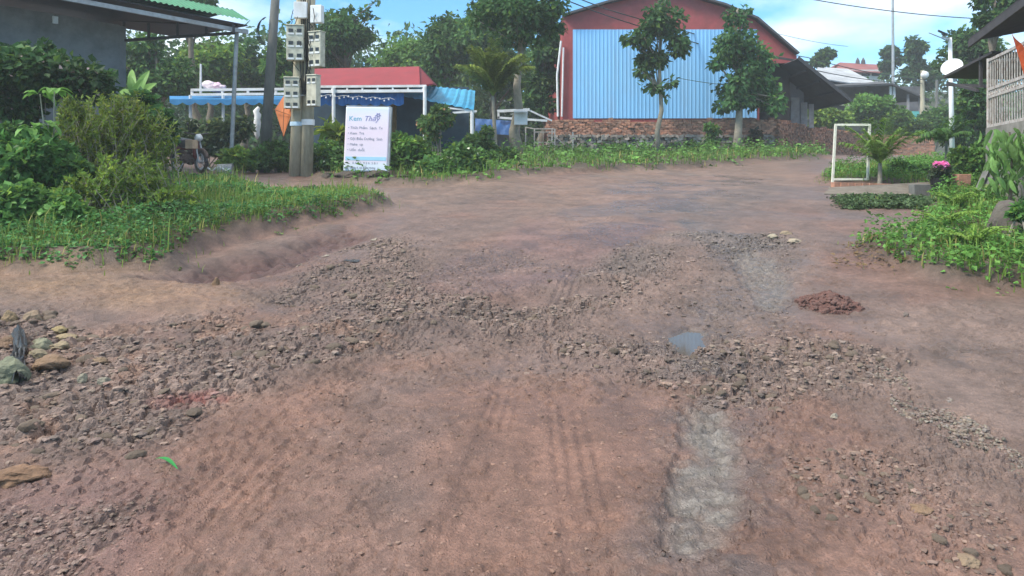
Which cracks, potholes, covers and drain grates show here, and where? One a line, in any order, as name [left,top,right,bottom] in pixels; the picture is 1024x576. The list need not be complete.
pothole [666,325,712,357]
